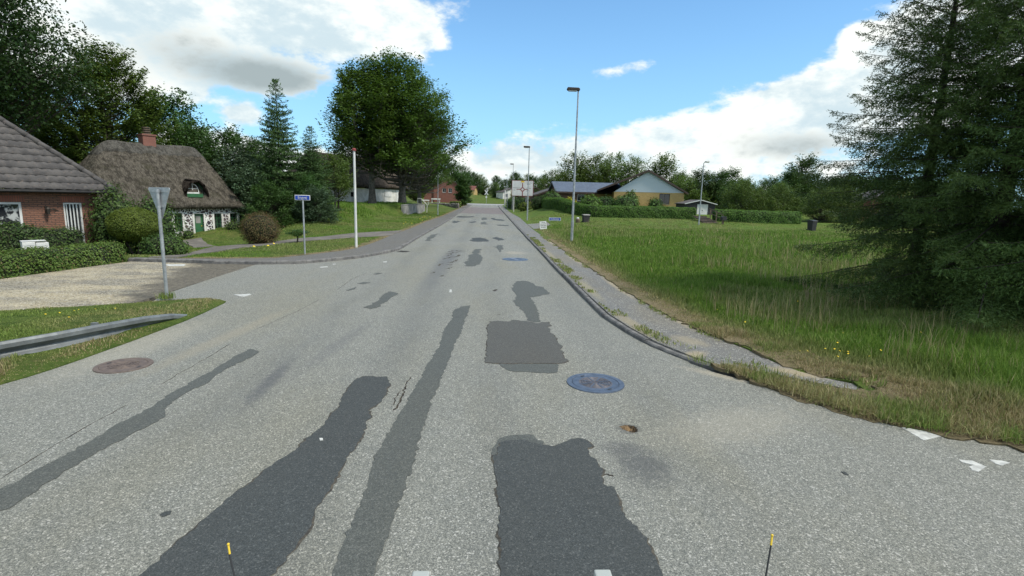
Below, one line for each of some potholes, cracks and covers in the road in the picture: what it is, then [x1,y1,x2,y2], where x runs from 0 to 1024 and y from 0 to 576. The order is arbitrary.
crack [393,377,411,411]
manhole cover [92,357,154,374]
manhole cover [567,373,625,394]
